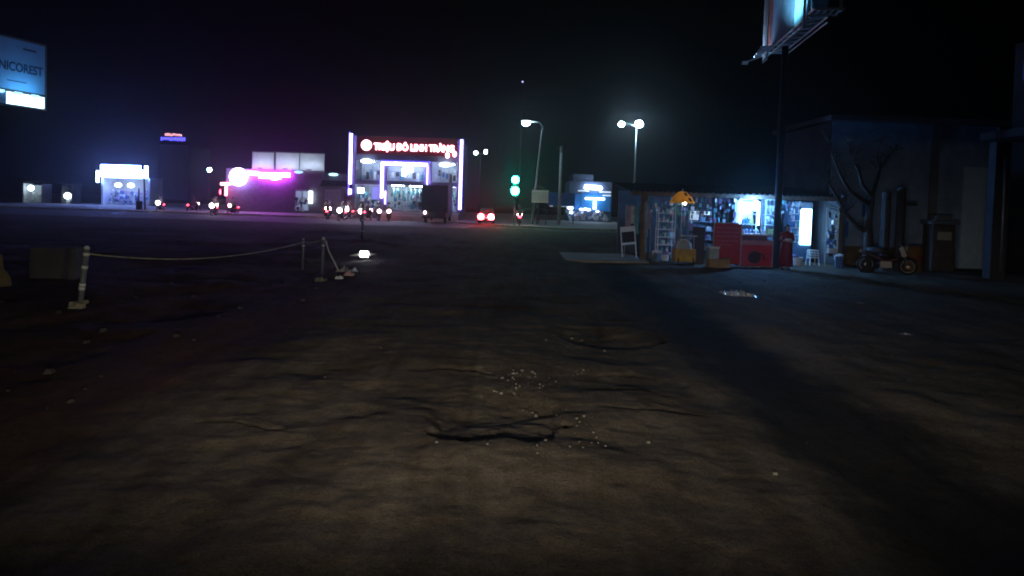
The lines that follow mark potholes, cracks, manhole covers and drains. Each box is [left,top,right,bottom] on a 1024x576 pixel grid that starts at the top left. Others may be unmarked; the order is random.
pothole [553,324,674,350]
pothole [414,382,574,443]
crack [425,363,497,377]
crack [191,416,293,434]
crack [581,370,716,417]
